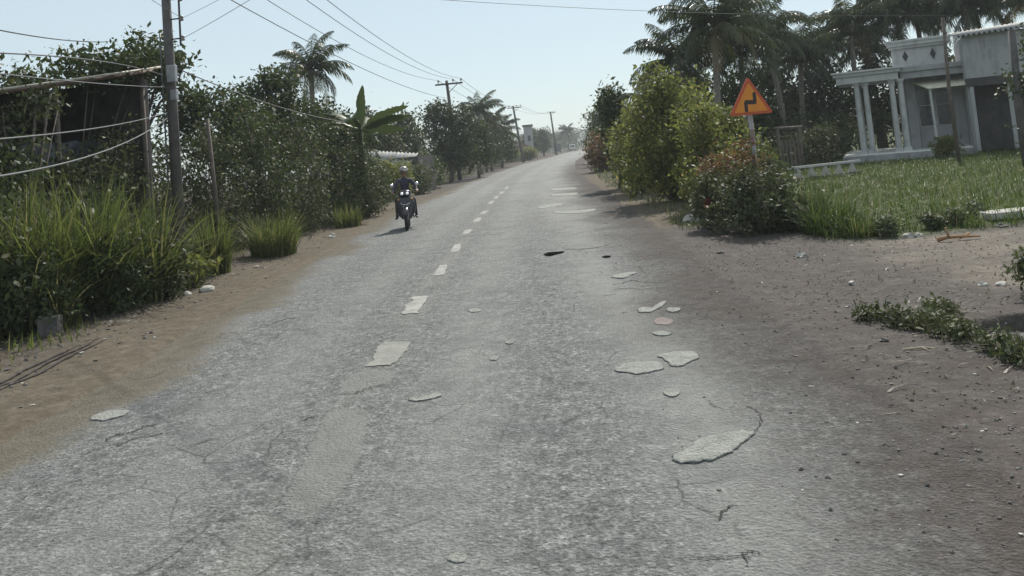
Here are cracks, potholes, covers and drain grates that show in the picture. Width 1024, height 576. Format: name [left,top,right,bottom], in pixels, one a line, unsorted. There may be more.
crack [105,425,163,447]
crack [690,550,761,563]
